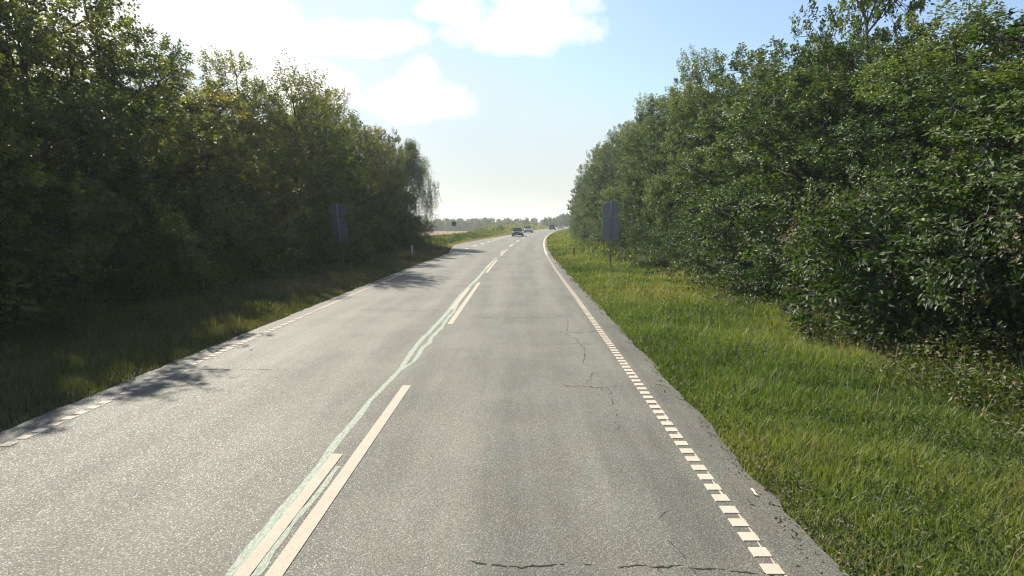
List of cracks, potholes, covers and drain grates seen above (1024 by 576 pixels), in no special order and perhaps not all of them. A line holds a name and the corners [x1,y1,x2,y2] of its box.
crack [473,540,773,576]
crack [486,316,620,430]
